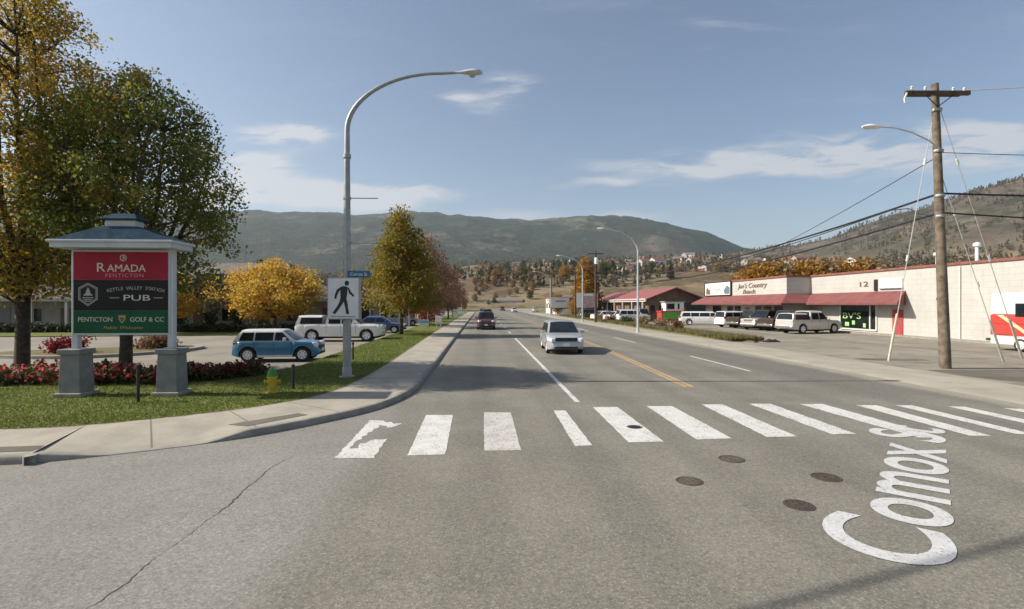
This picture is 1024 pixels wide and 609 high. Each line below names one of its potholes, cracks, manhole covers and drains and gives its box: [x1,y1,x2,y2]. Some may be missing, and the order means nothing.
manhole cover [810,472,843,482]
manhole cover [718,455,746,463]
manhole cover [676,476,704,486]
crack [86,457,292,609]
manhole cover [782,499,816,511]
